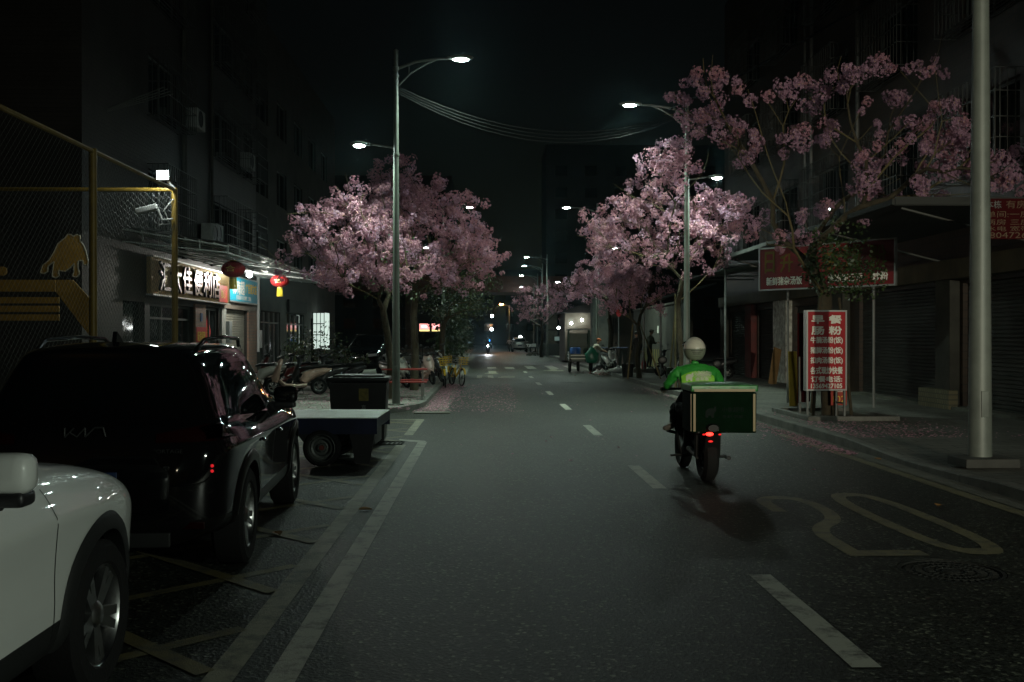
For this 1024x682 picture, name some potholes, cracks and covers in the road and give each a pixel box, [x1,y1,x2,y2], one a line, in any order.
manhole cover [897,559,1007,583]
